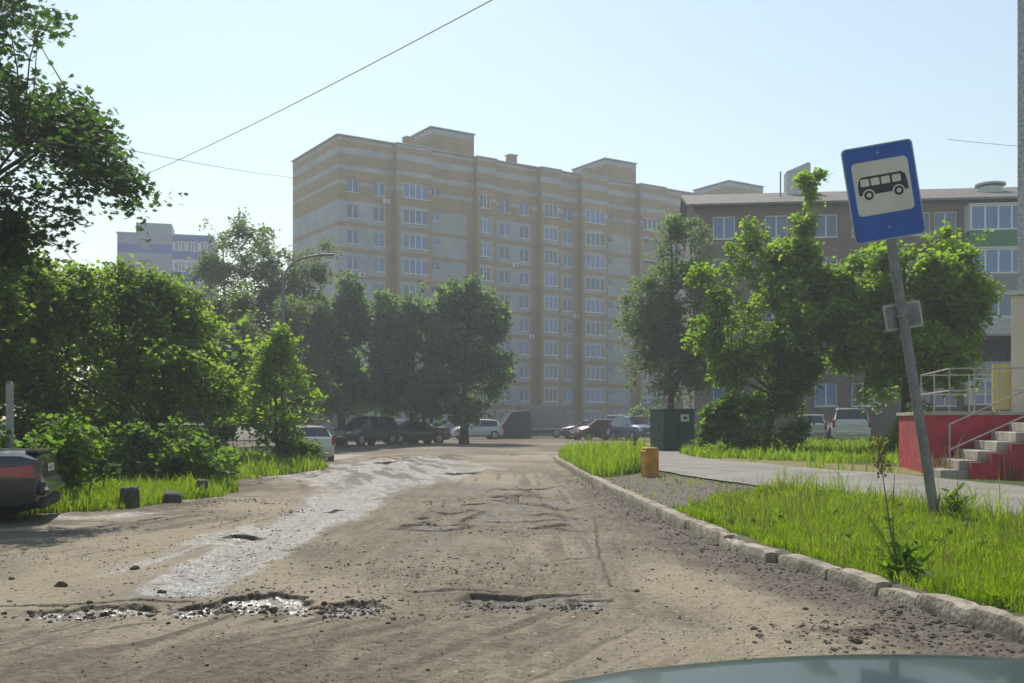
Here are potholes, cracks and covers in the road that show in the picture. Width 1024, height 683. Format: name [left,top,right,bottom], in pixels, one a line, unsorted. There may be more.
crack [369,485,637,608]
pothole [400,515,443,525]
pothole [0,604,183,628]
pothole [433,591,620,617]
pothole [139,589,341,626]
